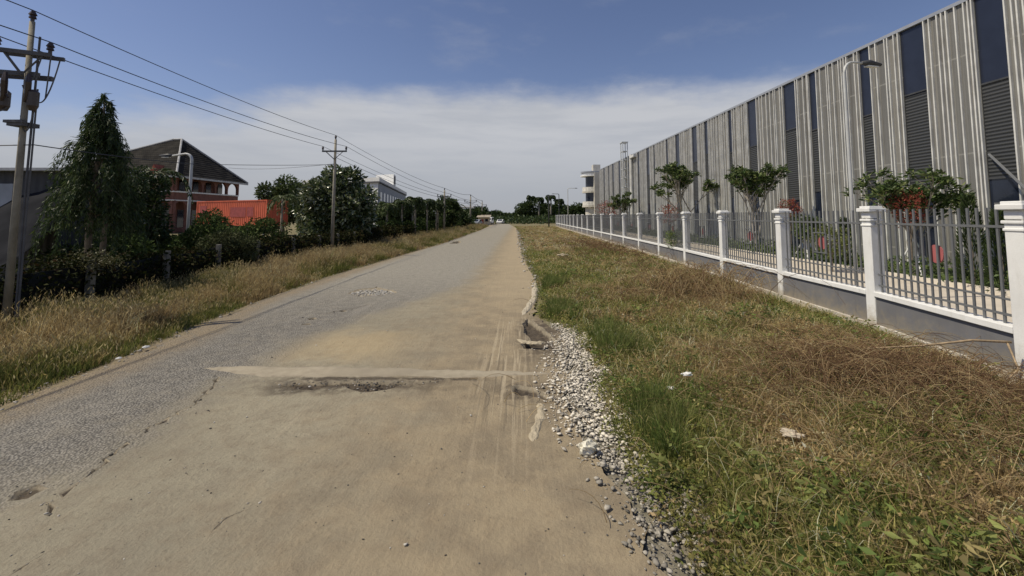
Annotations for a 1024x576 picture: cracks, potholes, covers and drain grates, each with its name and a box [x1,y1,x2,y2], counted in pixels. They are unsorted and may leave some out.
pothole [521,319,560,350]
crack [210,505,254,533]
pothole [8,484,48,501]
pothole [275,379,436,392]
